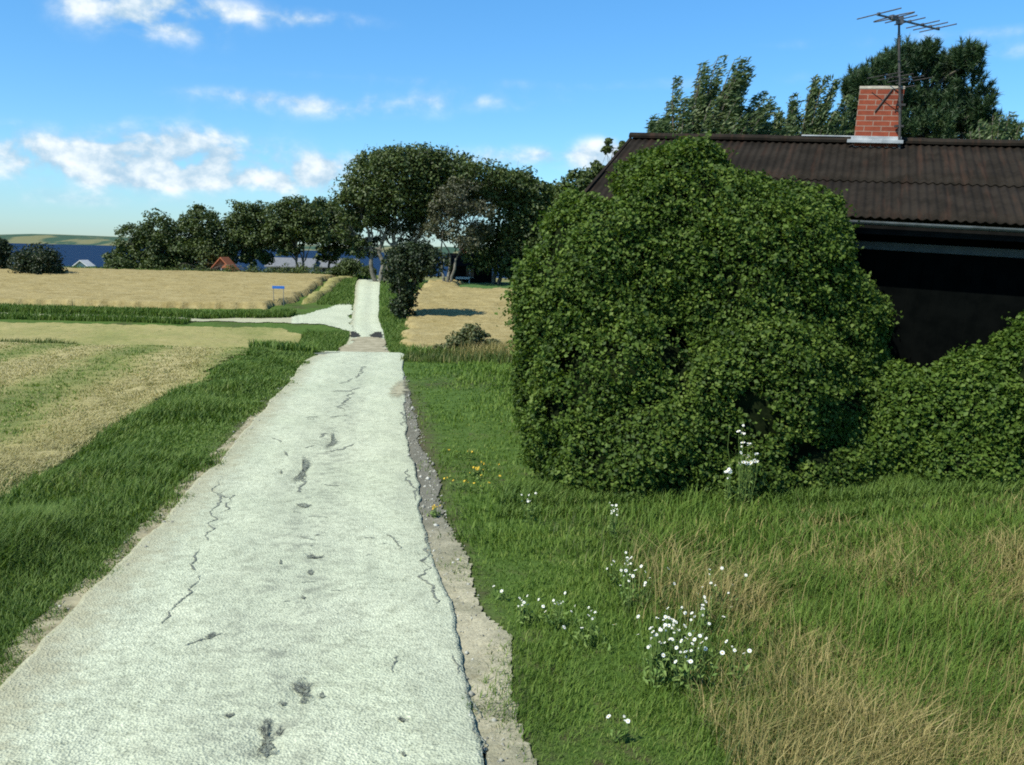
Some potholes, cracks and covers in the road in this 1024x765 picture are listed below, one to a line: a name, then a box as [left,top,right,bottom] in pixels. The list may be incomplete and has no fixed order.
pothole [255,718,277,758]
crack [305,366,366,452]
pothole [292,677,313,703]
crack [161,476,235,623]
crack [417,528,440,605]
pothole [292,456,312,483]
